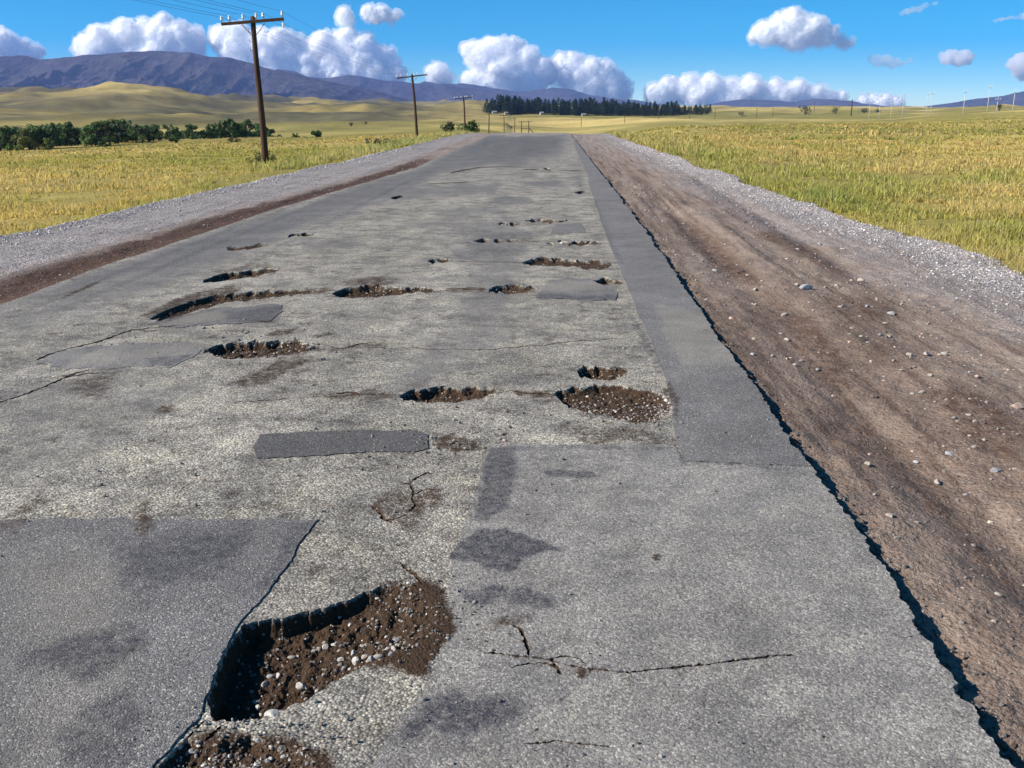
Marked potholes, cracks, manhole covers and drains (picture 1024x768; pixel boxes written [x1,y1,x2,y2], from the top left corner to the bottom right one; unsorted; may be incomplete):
crack [483,625,792,675]
pothole [518,256,614,270]
pothole [207,580,438,722]
pothole [331,284,440,299]
pothole [158,735,316,768]
pothole [553,384,673,424]
crack [372,472,434,523]
pothole [203,339,328,359]
pothole [398,385,512,403]
crack [0,326,171,402]
pothole [577,365,629,380]
pothole [150,288,326,322]
